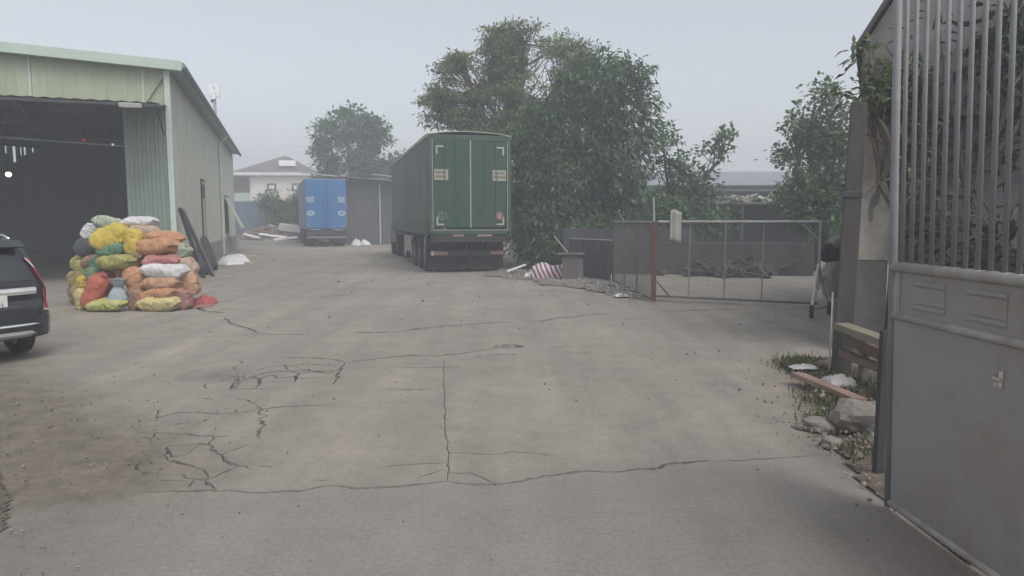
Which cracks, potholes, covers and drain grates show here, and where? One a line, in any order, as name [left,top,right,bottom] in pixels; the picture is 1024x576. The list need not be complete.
crack [357,314,598,333]
crack [197,307,312,335]
crack [128,348,805,493]
